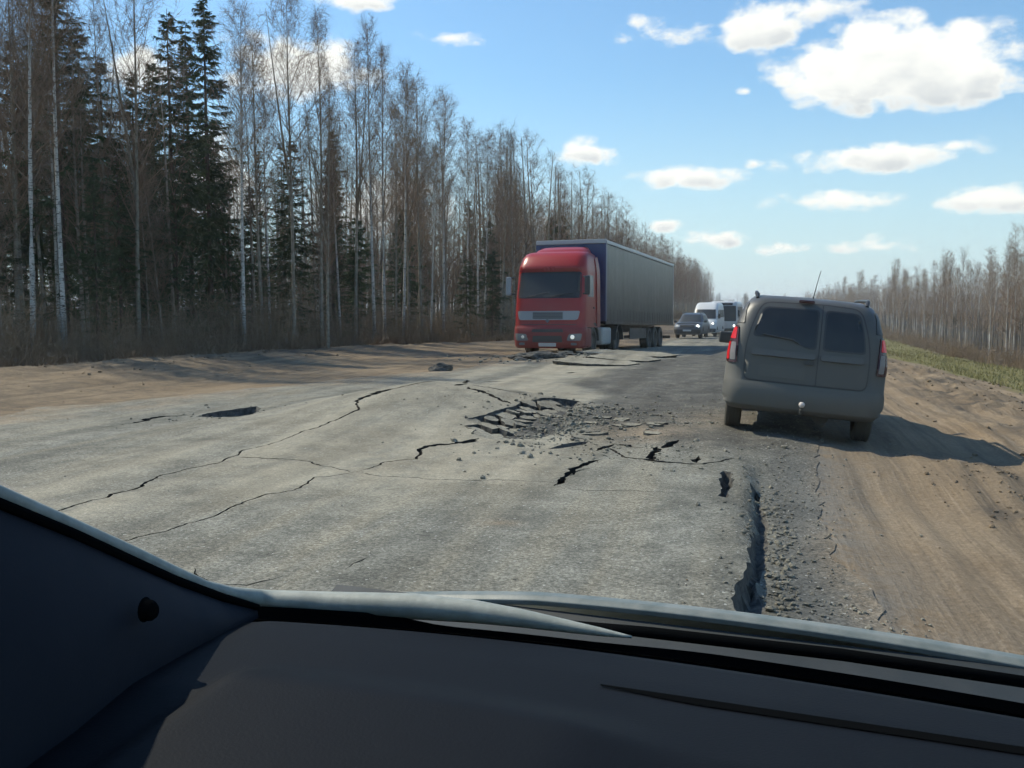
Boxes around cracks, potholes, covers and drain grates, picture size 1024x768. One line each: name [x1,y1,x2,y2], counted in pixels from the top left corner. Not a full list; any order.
pothole [465,398,579,439]
crack [554,440,733,493]
crack [58,380,558,541]
pothole [718,471,735,498]
pothole [202,406,261,417]
